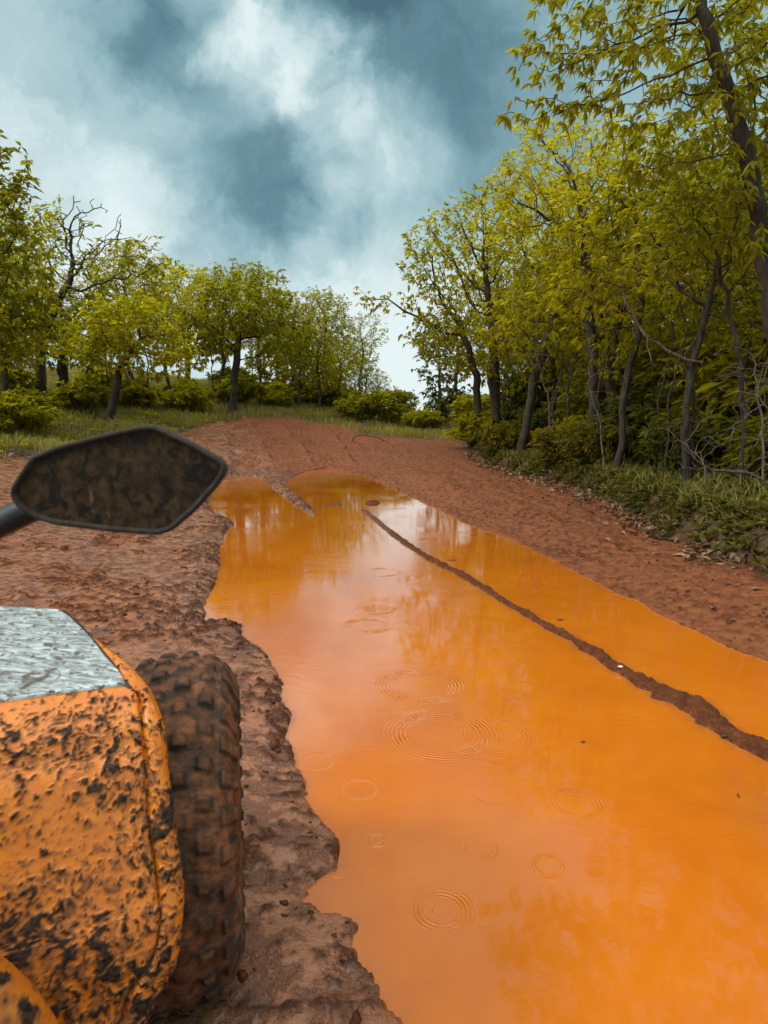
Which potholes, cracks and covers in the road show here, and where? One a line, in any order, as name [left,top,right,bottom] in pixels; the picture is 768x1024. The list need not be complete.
pothole [193,465,768,1024]
